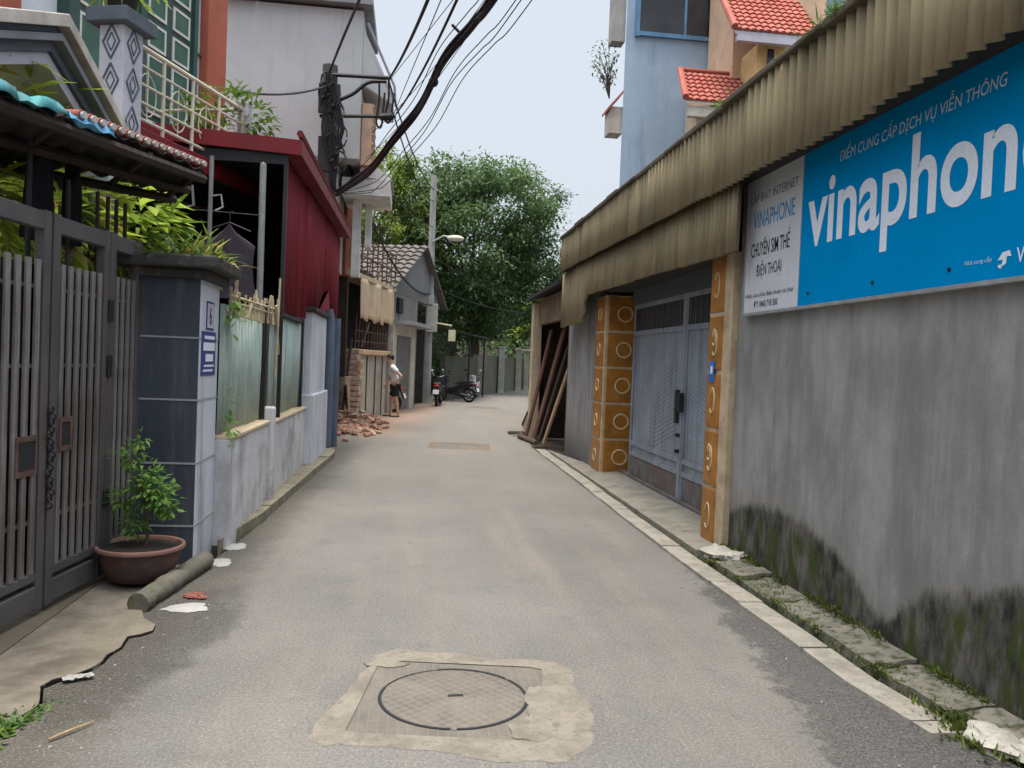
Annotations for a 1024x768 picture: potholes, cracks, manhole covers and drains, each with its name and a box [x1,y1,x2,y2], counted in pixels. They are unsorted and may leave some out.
manhole cover [307,649,594,763]
